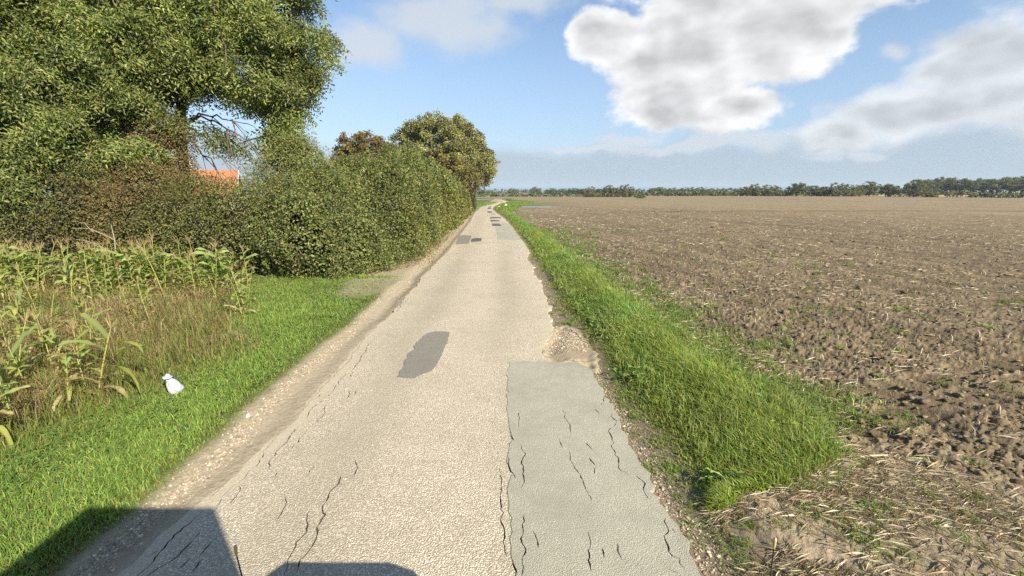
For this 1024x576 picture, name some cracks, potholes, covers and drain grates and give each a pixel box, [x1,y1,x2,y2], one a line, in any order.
crack [499,414,539,574]
crack [214,331,372,516]
crack [138,524,212,575]
crack [588,534,622,570]
crack [283,461,358,576]
